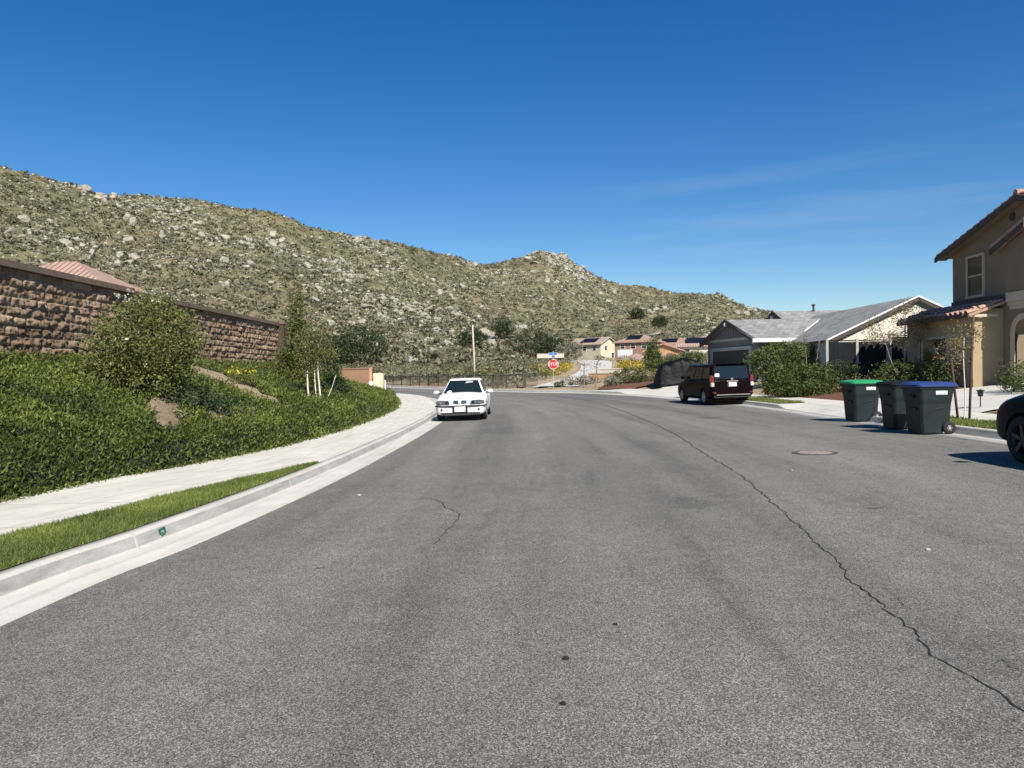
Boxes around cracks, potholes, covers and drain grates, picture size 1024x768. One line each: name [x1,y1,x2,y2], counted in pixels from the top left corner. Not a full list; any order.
crack [382,497,608,548]
crack [551,395,1024,711]
